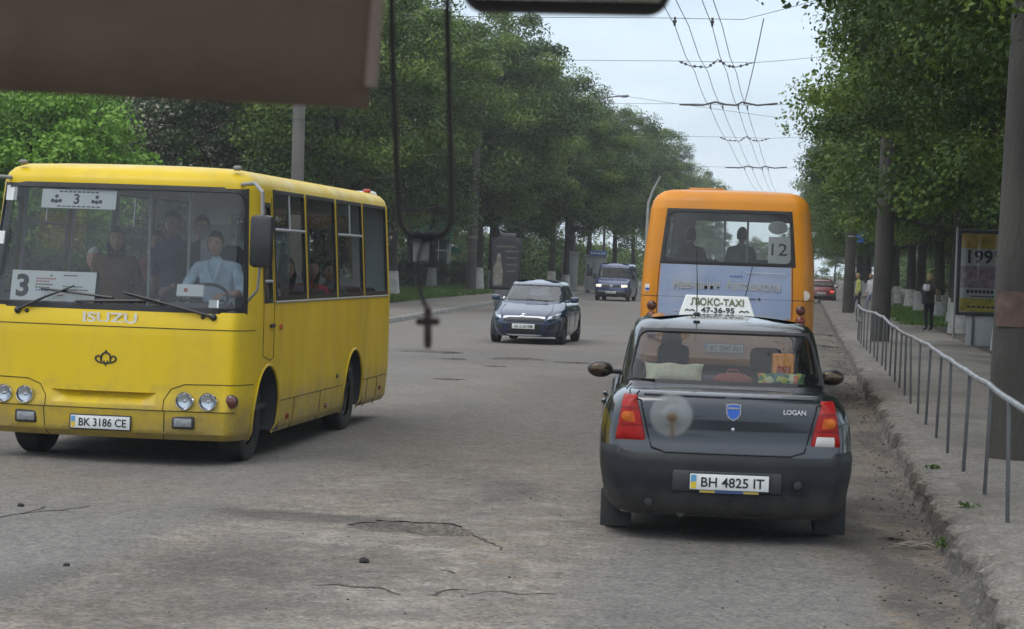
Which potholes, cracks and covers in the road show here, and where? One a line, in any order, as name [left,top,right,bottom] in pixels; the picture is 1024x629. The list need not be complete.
crack [1,506,88,517]
crack [324,583,399,595]
pothole [348,521,473,537]
crack [431,570,551,595]
